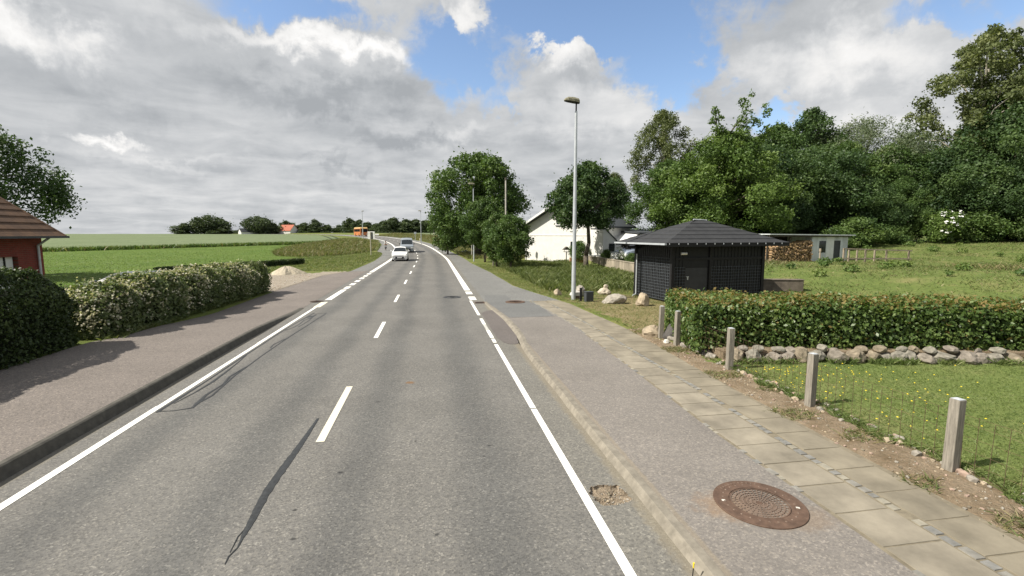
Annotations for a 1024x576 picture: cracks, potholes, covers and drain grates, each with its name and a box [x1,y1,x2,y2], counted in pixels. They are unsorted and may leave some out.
pothole [588,484,632,506]
manhole cover [713,481,810,530]
